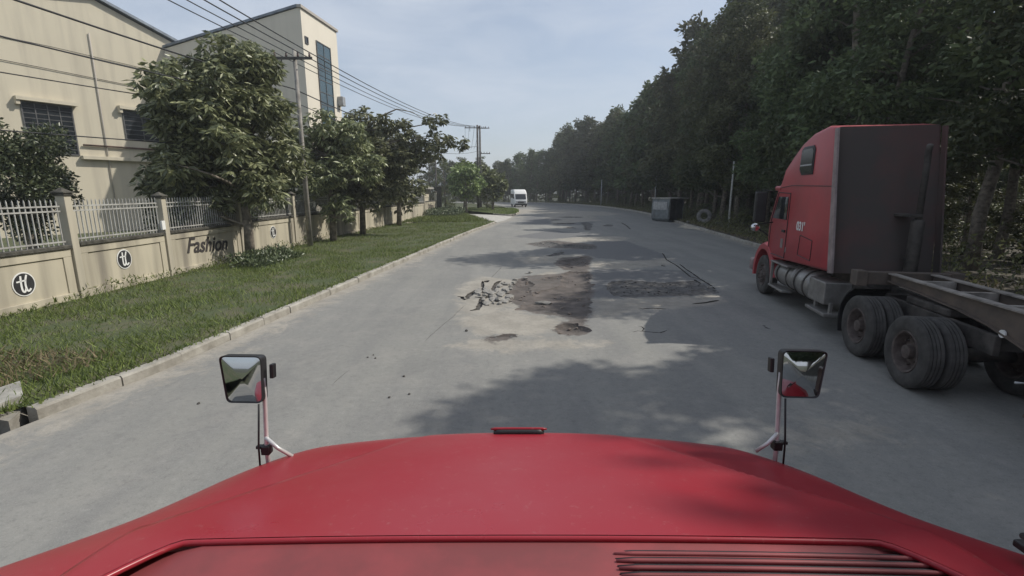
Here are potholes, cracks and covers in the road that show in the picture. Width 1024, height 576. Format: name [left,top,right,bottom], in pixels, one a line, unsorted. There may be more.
pothole [509,271,595,320]
crack [662,253,719,304]
pothole [557,257,590,269]
pothole [555,323,592,335]
